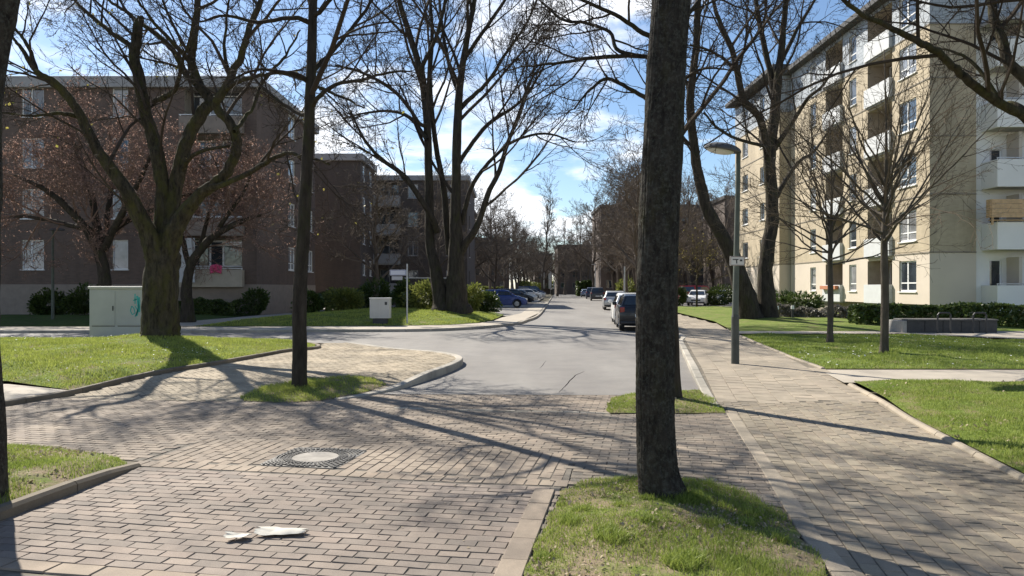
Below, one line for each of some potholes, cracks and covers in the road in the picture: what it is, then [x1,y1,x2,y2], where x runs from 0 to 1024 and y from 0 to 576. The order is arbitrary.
manhole cover [260,447,367,469]
